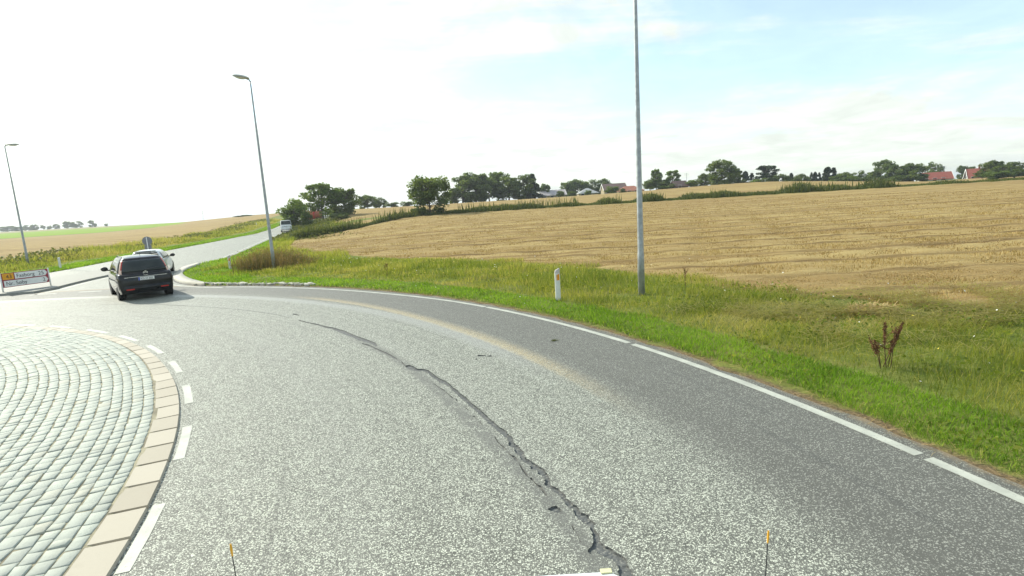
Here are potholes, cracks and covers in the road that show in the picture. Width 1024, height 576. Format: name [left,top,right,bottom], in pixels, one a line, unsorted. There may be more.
crack [145,304,634,576]
